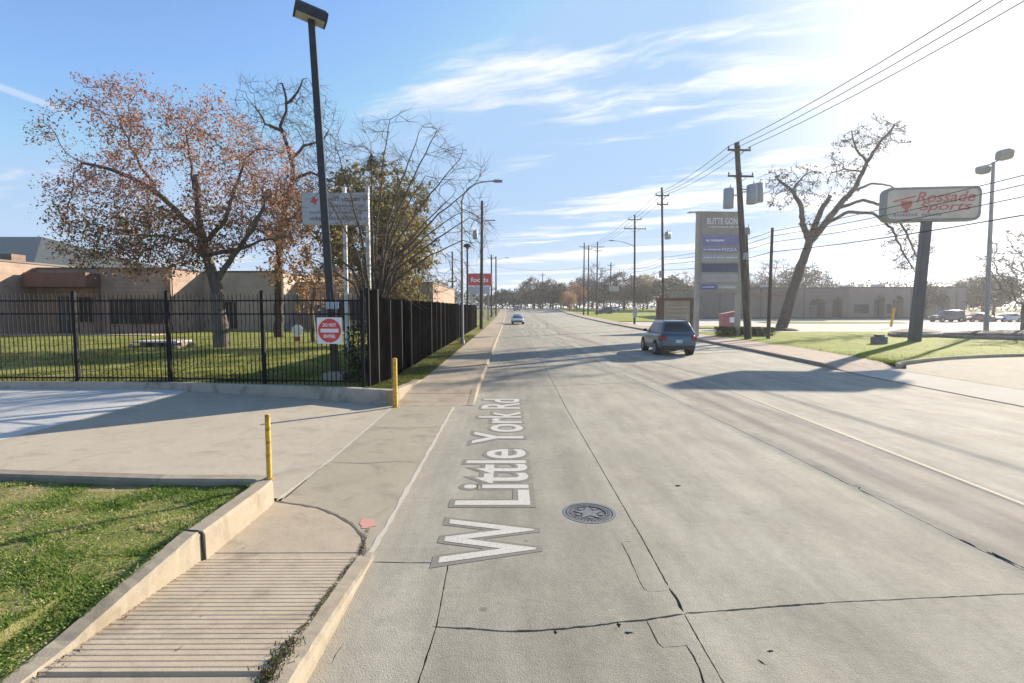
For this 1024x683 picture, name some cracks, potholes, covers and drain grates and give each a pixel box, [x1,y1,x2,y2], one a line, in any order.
manhole cover [562,502,616,524]
crack [274,500,367,556]
